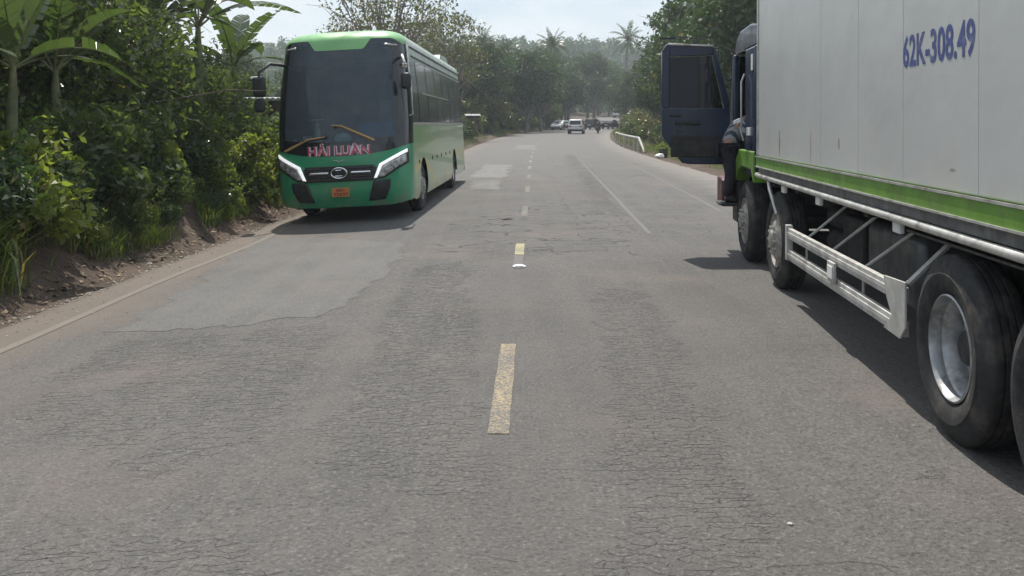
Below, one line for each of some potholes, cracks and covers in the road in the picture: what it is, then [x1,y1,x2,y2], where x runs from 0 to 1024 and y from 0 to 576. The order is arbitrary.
crack [494,289,898,576]
crack [18,314,335,481]
crack [2,535,281,576]
crack [308,172,721,500]
